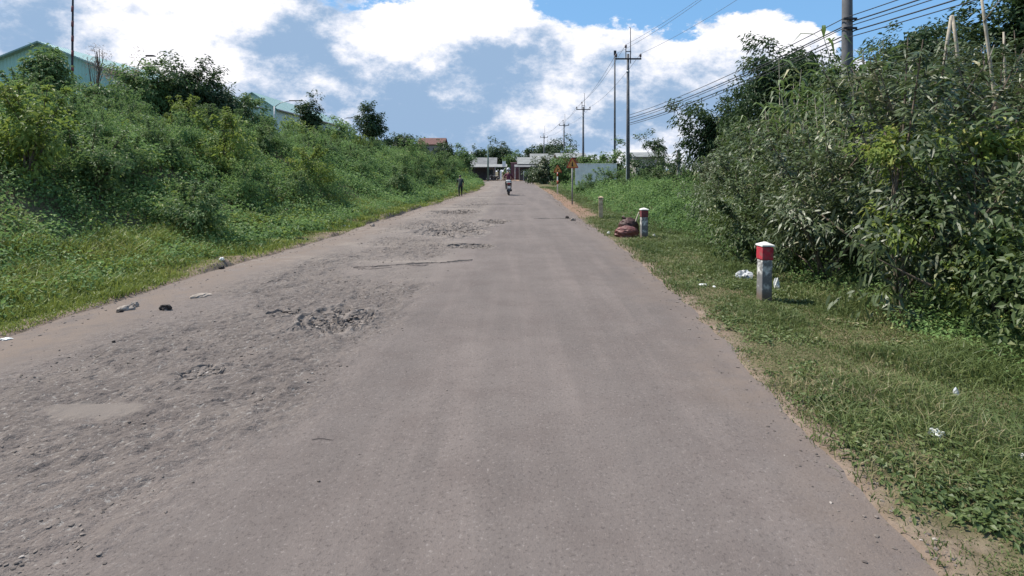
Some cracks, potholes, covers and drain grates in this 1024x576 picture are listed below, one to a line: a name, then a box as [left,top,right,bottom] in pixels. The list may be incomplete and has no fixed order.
pothole [284,303,383,337]
pothole [399,221,500,240]
pothole [174,363,225,380]
crack [353,259,473,269]
